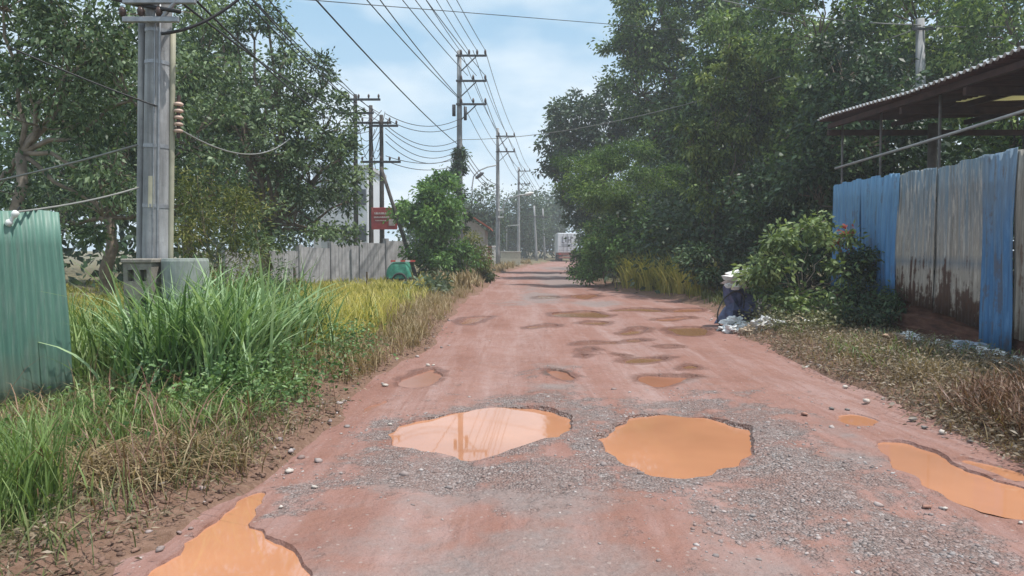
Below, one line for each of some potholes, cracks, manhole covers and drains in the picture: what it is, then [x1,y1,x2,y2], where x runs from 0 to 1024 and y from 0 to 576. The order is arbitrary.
pothole [594,414,755,479]
pothole [396,368,443,388]
pothole [459,316,493,325]
pothole [667,327,708,336]
pothole [875,439,1024,520]
pothole [834,412,881,426]
pothole [387,405,573,461]
pothole [144,491,313,576]
pothole [546,369,575,380]
pothole [637,374,699,387]
